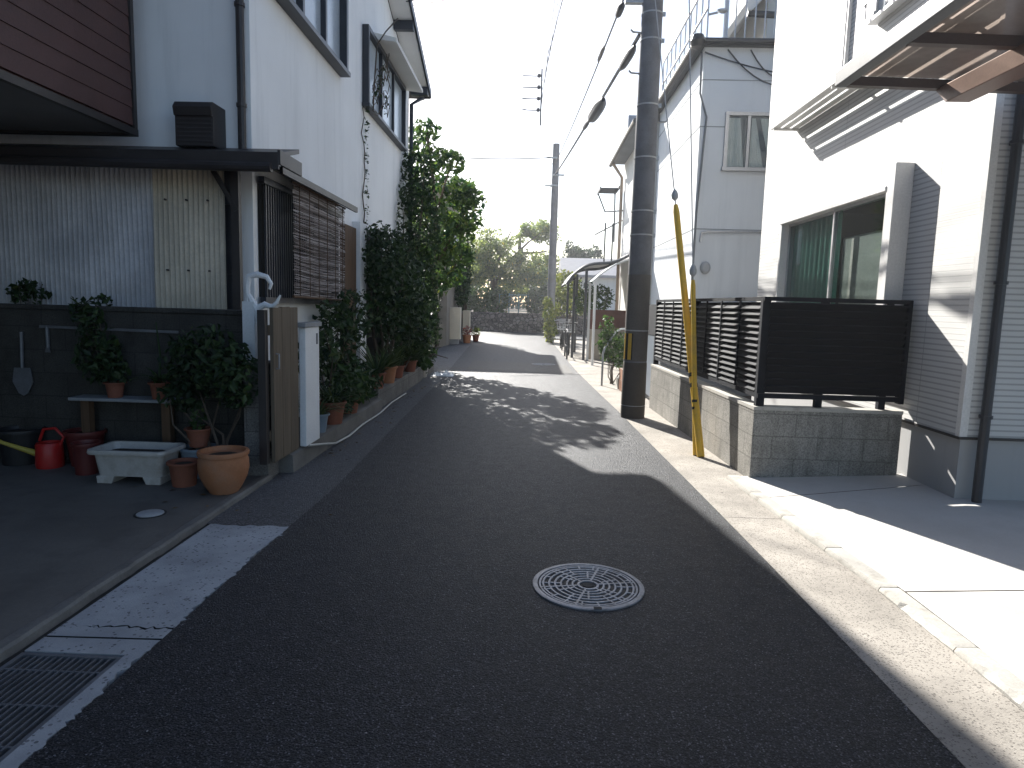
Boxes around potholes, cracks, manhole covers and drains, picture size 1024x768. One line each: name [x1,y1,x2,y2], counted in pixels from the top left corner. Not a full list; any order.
manhole cover [532,563,645,611]
drain grate [0,652,122,762]
utility cover [133,509,167,519]
